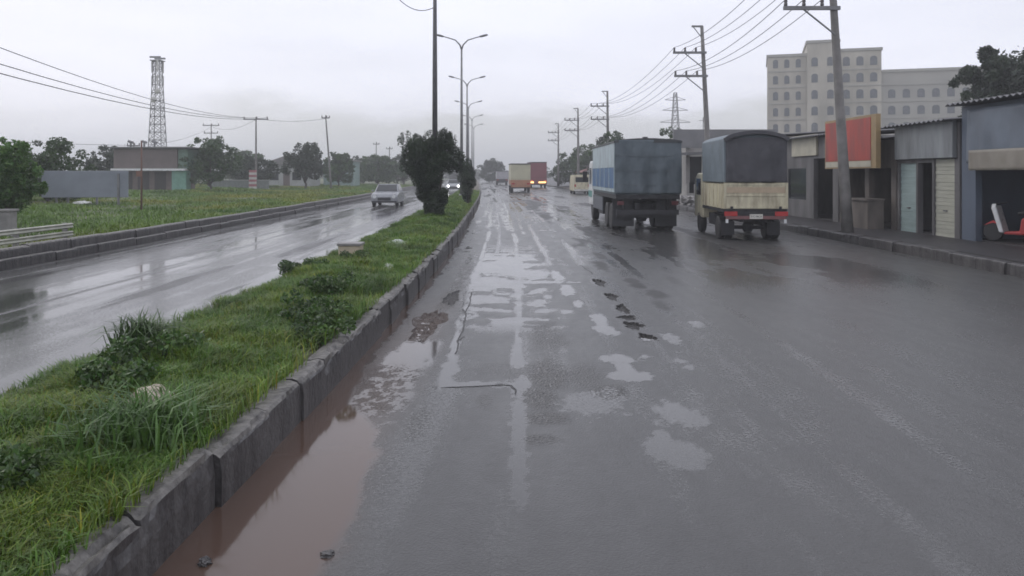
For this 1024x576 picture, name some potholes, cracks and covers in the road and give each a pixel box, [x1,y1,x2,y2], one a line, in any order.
pothole [589,278,610,287]
pothole [600,292,623,302]
pothole [439,290,463,307]
crack [441,384,517,395]
pothole [611,303,635,315]
pothole [619,320,651,331]
pothole [405,309,453,344]
pothole [633,332,663,342]
crack [455,292,472,354]
